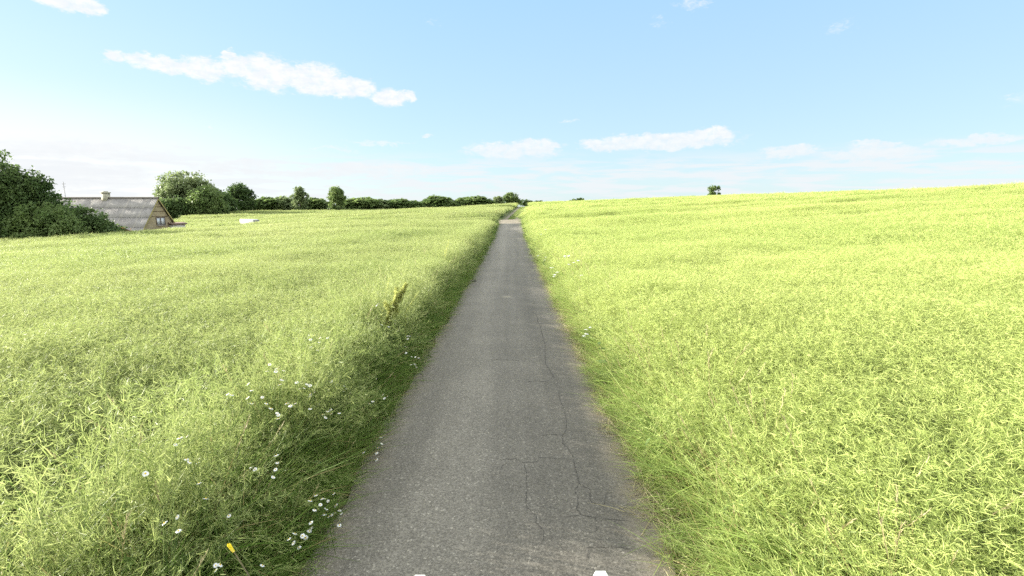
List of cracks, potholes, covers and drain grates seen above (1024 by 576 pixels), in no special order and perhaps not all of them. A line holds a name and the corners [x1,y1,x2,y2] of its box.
crack [502,312,630,563]
